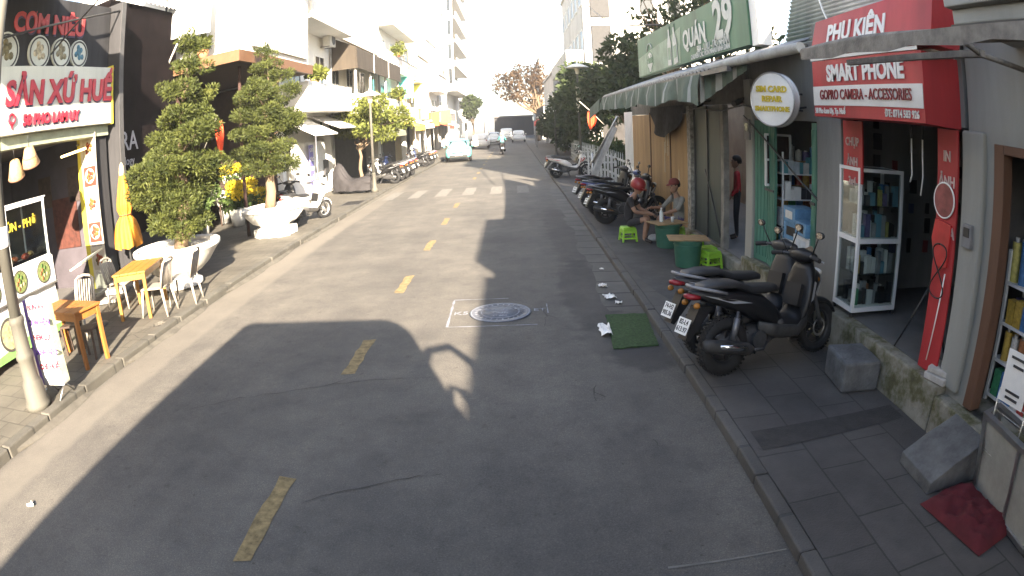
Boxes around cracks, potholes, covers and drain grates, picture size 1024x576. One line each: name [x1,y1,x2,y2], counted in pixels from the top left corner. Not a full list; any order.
crack [189,373,422,410]
manhole cover [446,298,549,327]
crack [305,474,440,502]
